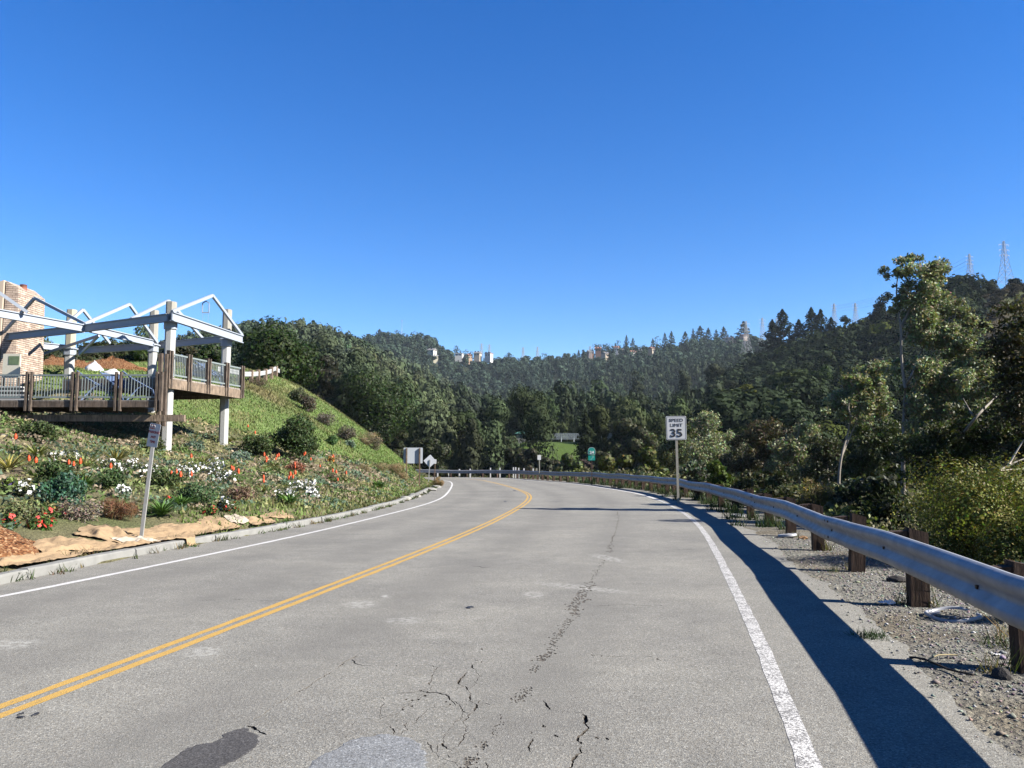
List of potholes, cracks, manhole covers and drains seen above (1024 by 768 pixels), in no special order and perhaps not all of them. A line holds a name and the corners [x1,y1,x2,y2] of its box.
crack [543,701,589,768]
crack [346,648,490,768]
